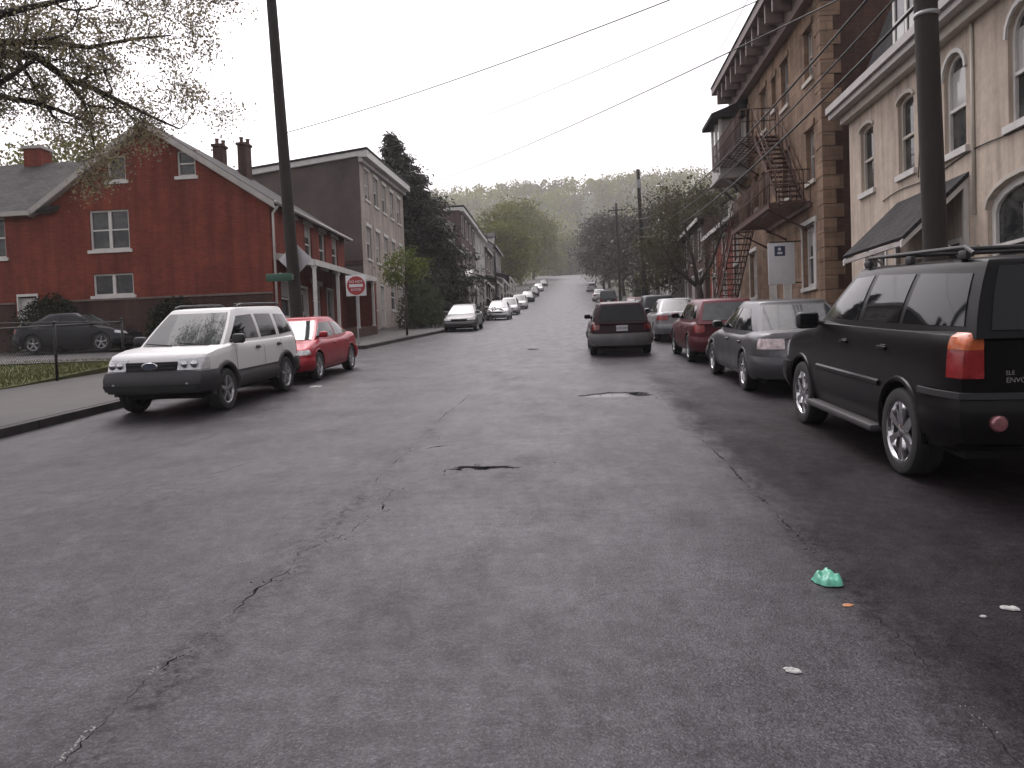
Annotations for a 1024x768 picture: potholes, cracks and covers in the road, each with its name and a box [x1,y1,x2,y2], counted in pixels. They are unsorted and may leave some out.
crack [54,488,404,768]
pothole [410,462,555,475]
